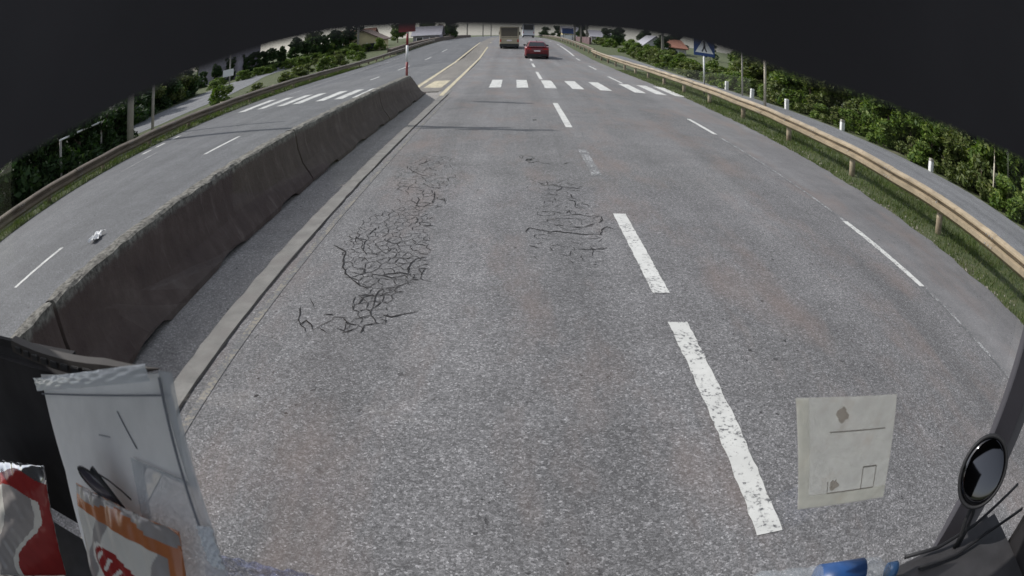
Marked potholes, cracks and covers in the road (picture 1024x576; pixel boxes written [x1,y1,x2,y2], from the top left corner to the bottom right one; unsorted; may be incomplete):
crack [393,158,456,226]
crack [525,178,615,265]
